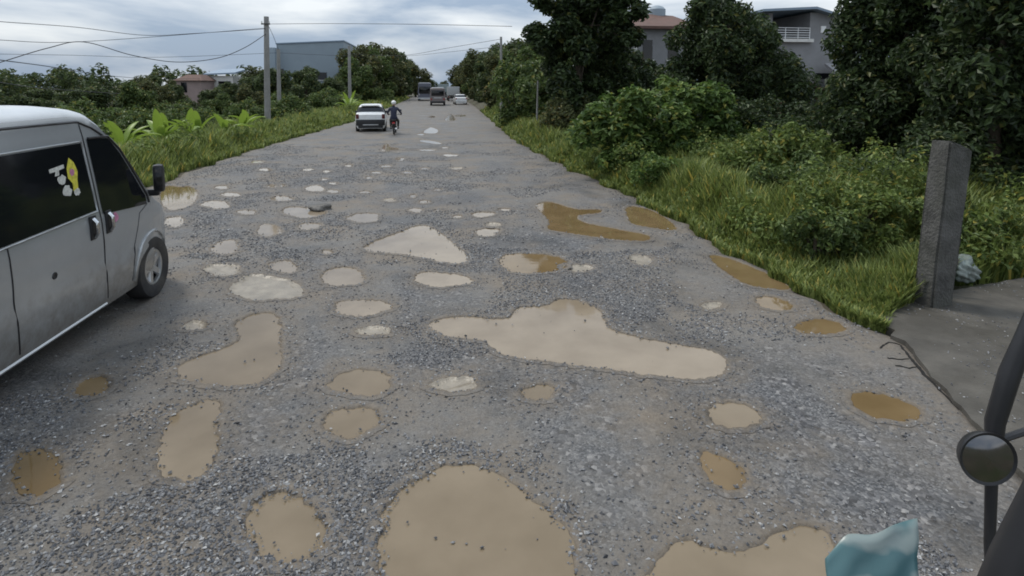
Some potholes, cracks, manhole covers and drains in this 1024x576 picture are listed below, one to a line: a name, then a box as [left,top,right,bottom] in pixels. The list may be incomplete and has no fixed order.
pothole [358,224,472,266]
pothole [494,251,573,275]
pothole [222,272,310,303]
pothole [698,396,774,434]
pothole [362,456,591,576]
pothole [629,514,844,576]
crack [880,342,960,410]
pothole [533,200,655,242]
pothole [0,441,77,505]
pothole [687,443,760,498]
pothole [785,315,855,337]
pothole [840,386,934,427]
